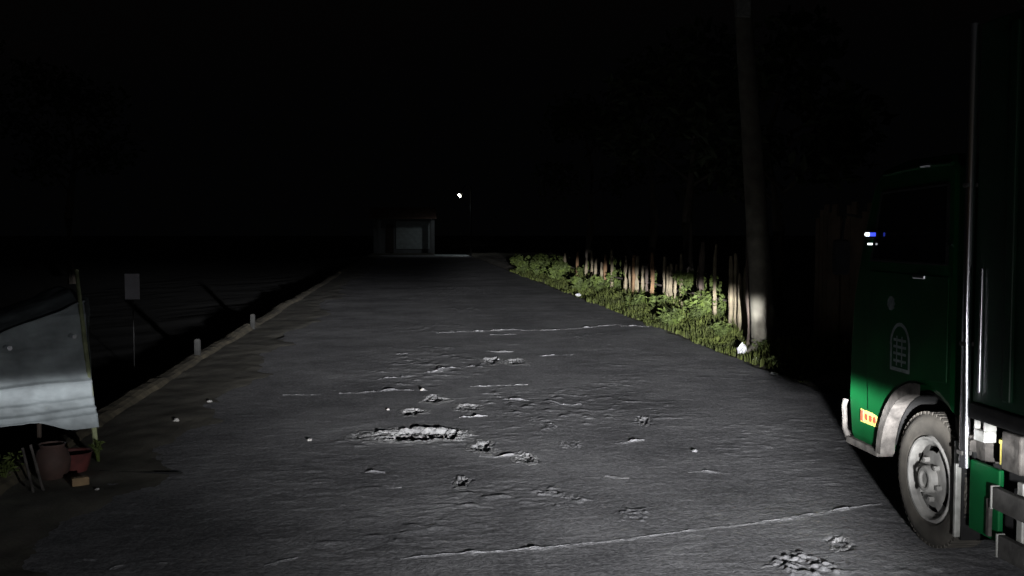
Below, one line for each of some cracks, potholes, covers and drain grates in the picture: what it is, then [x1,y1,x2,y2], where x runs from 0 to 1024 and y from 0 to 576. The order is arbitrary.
pothole [479,356,510,366]
pothole [637,415,650,427]
pothole [353,426,480,444]
pothole [417,393,456,405]
pothole [450,402,485,412]
pothole [464,438,498,455]
crack [339,324,649,418]
pothole [828,534,852,552]
pothole [510,451,538,466]
pothole [495,357,532,366]
pothole [453,475,472,490]
